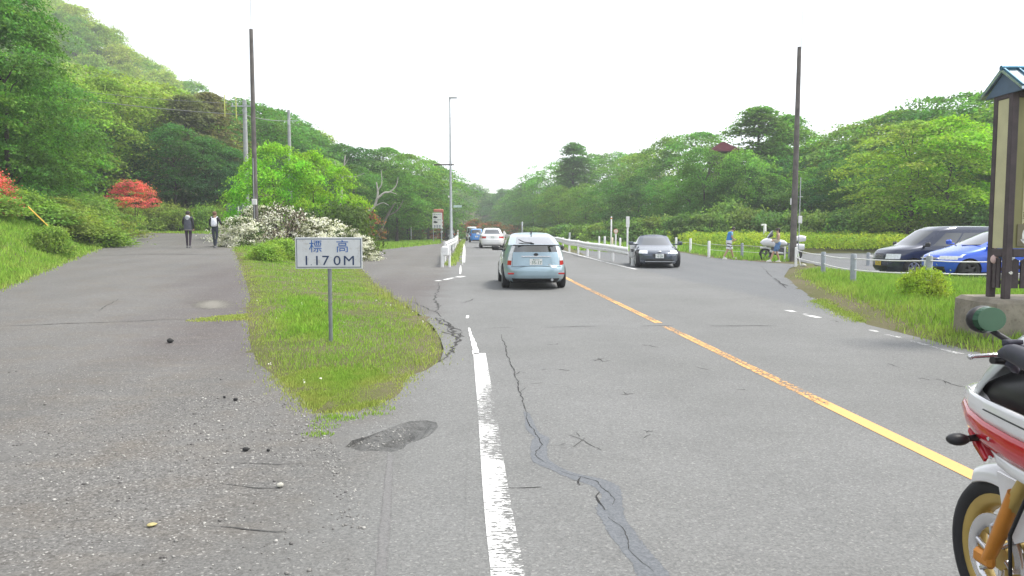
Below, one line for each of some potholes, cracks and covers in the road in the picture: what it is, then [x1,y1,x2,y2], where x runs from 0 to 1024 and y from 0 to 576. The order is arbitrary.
crack [501,325,761,576]
pothole [346,420,438,452]
crack [399,301,465,363]
